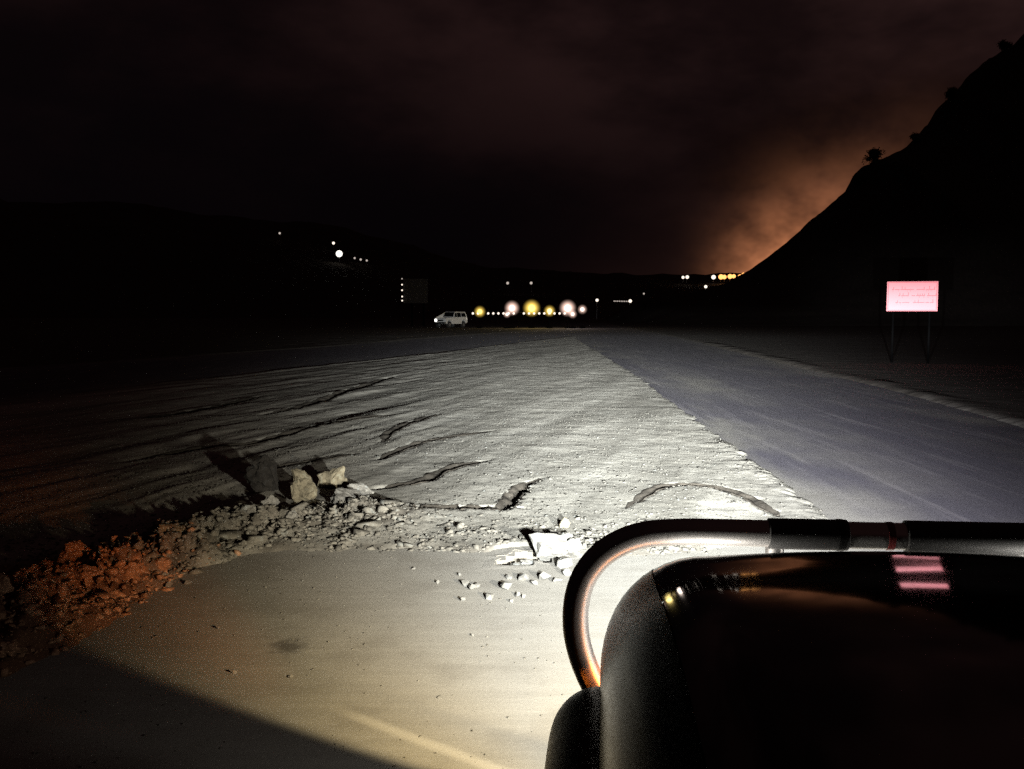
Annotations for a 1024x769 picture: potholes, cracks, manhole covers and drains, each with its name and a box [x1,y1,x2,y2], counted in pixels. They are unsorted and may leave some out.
pothole [482,547,580,570]
crack [130,377,541,511]
crack [625,483,780,517]
